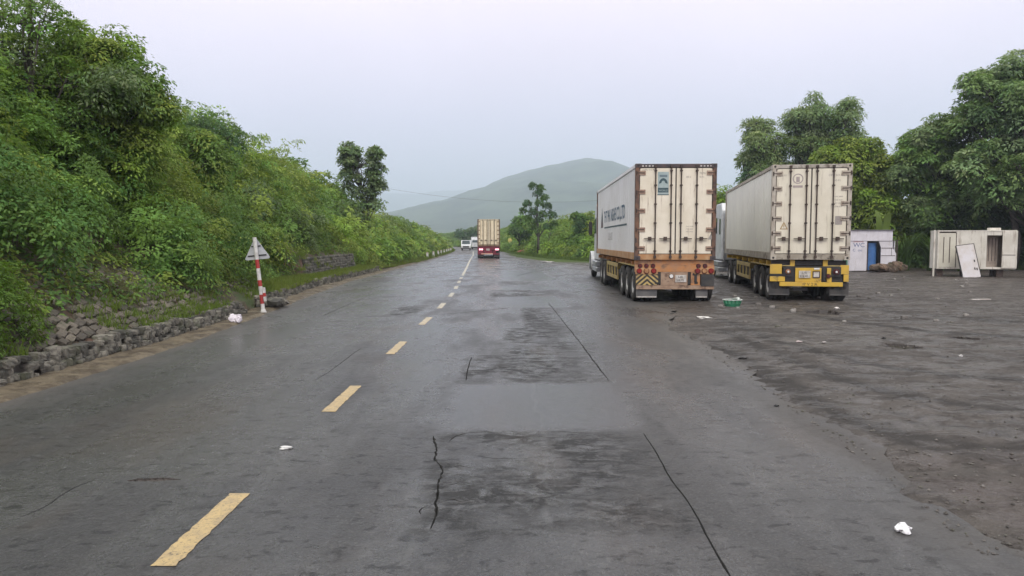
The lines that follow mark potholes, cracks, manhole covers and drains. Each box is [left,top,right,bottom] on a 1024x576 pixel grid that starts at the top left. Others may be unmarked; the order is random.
crack [419,432,618,529]
